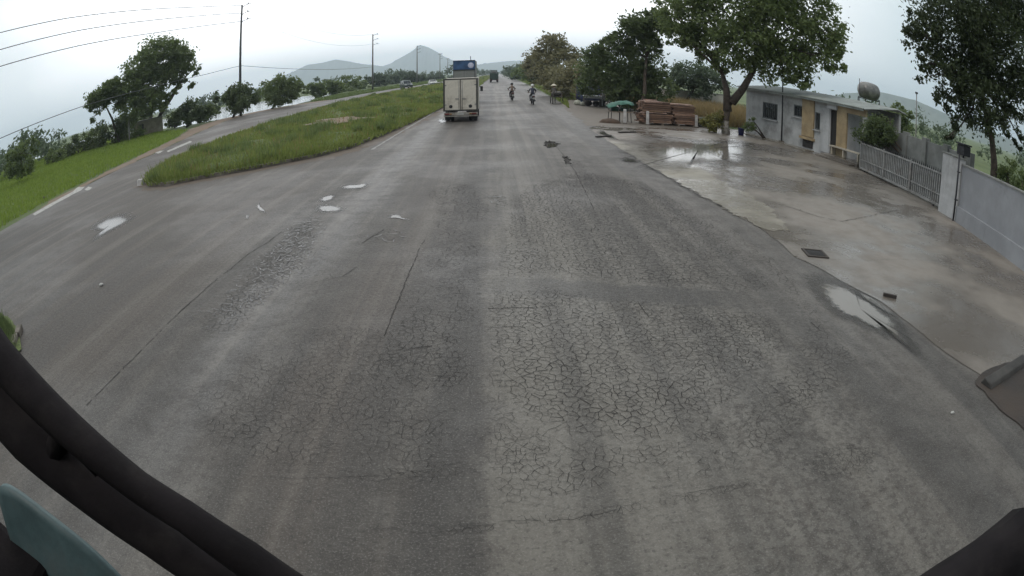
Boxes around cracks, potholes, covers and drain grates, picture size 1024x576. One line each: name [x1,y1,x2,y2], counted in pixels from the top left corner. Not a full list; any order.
crack [86,213,328,405]
crack [186,183,508,480]
crack [253,462,465,484]
crack [691,206,854,404]
crack [487,146,789,441]
crack [487,386,877,504]
crack [361,477,766,537]
